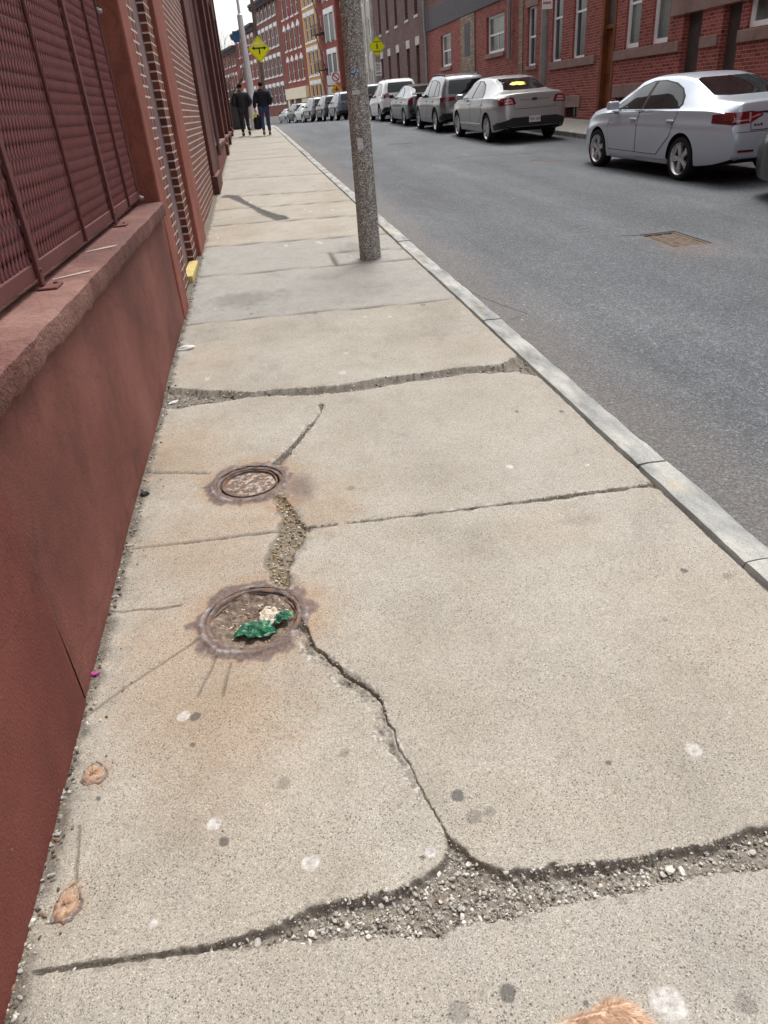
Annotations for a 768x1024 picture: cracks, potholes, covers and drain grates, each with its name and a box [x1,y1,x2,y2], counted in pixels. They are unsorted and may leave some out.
crack [264,483,656,589]
crack [299,618,450,836]
crack [162,355,537,466]
crack [88,638,232,716]
manhole cover [205,588,302,650]
drain grate [640,232,708,247]
manhole cover [216,467,283,499]
